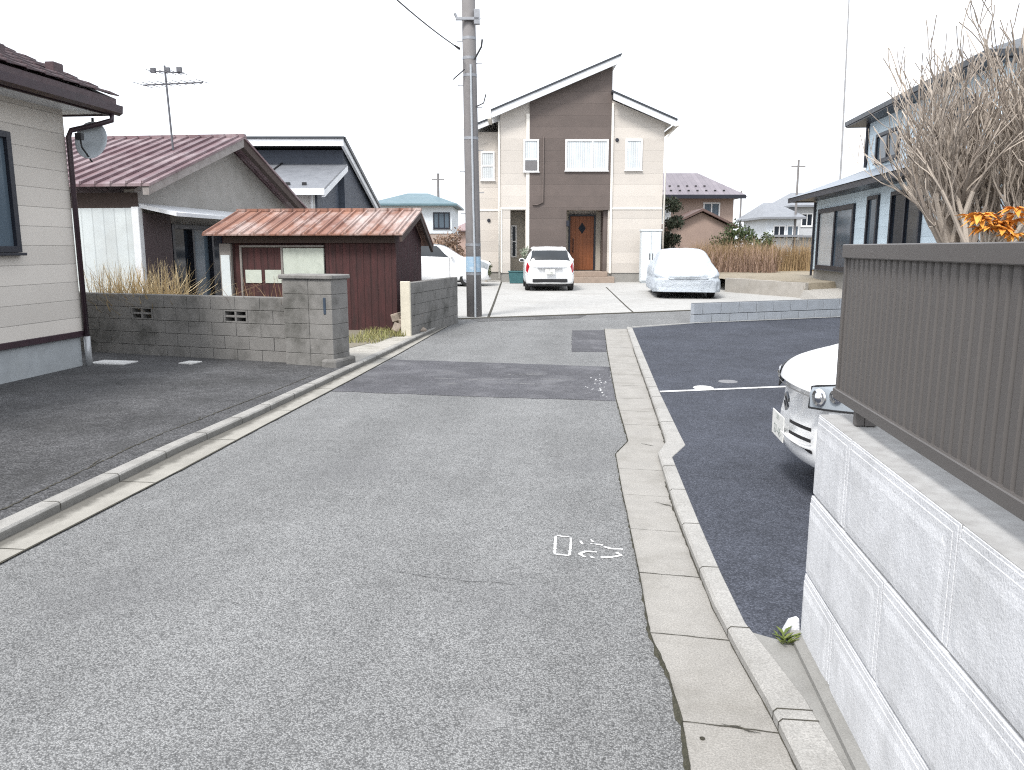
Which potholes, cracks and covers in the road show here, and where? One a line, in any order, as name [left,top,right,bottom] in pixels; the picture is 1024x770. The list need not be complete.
crack [396,571,514,585]
